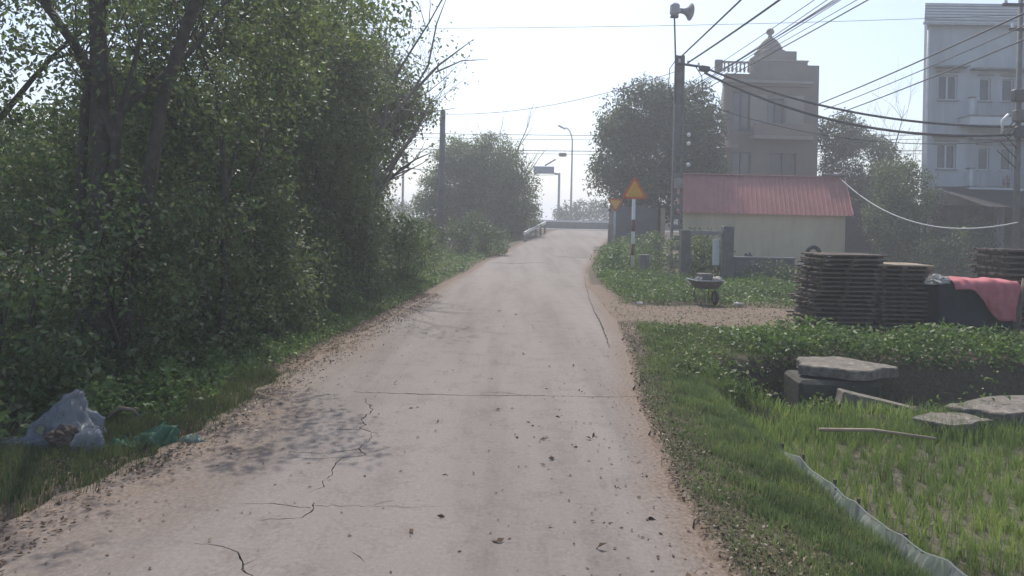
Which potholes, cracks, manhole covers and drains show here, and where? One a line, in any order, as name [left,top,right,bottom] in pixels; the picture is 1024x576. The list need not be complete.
crack [210,544,253,576]
crack [297,392,639,489]
crack [267,501,388,520]
crack [584,276,609,347]
